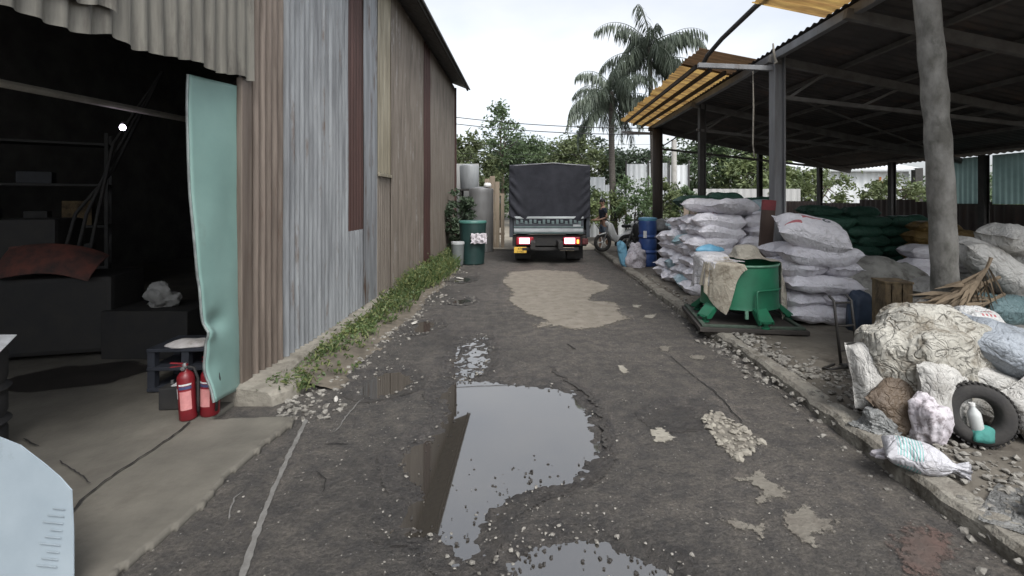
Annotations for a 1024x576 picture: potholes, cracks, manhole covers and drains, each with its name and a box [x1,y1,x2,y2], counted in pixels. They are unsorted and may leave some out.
pothole [400,317,449,336]
crack [550,366,608,447]
pothole [341,364,429,403]
crack [60,421,190,511]
crack [671,356,742,421]
pothole [437,333,500,380]
pothole [366,374,618,576]
pothole [442,296,479,306]
pothole [481,517,704,576]
